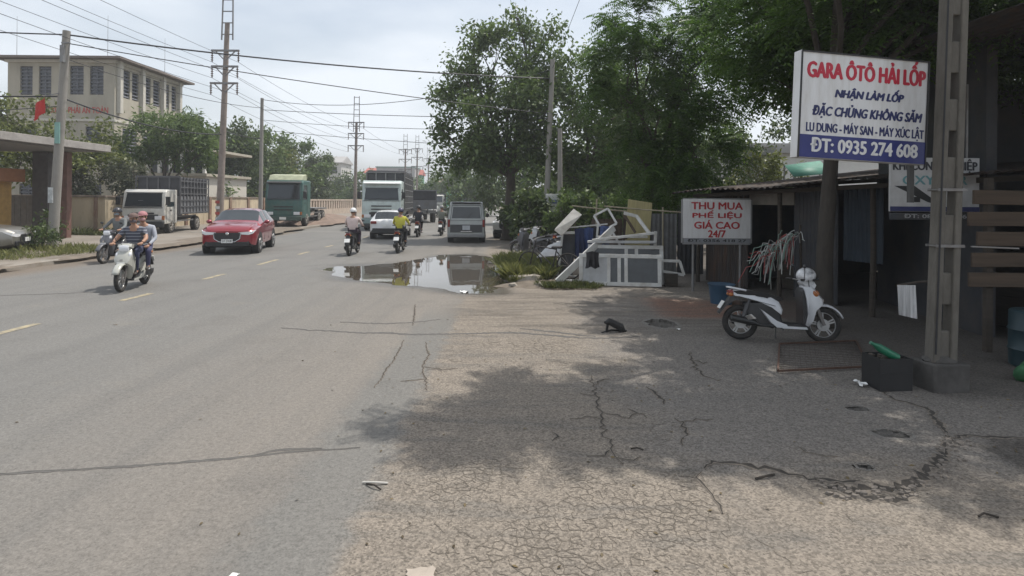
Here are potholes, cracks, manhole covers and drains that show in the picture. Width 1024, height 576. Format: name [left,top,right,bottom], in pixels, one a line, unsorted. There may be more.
crack [404,352,1024,576]
crack [287,305,640,390]
pothole [841,405,873,413]
pothole [867,428,917,440]
pothole [641,318,682,330]
